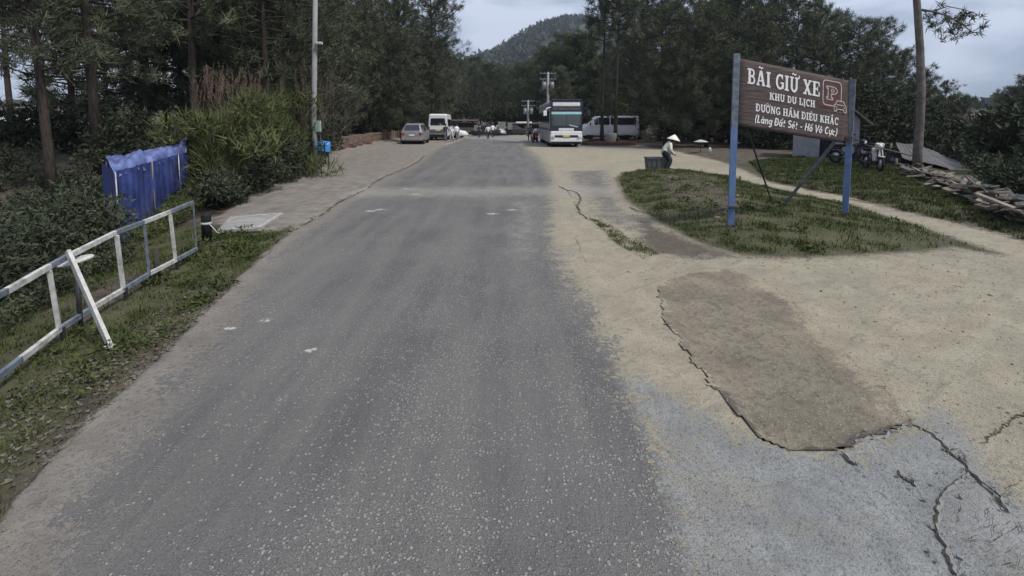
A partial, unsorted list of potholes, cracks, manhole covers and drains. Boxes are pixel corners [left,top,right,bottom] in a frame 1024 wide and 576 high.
crack [559,186,610,227]
crack [835,406,1024,576]
